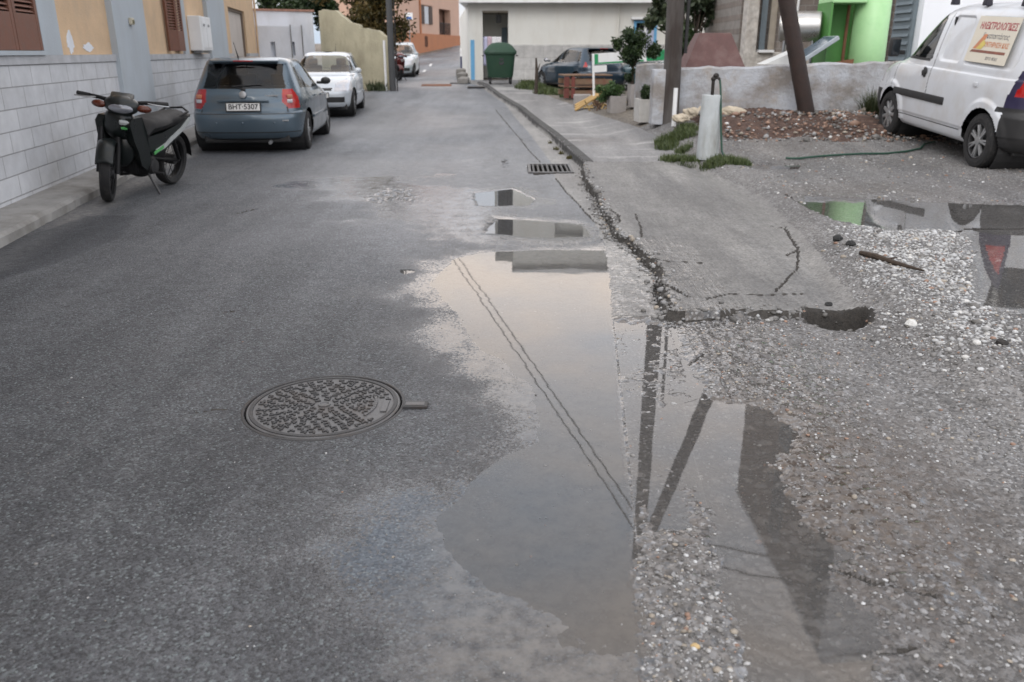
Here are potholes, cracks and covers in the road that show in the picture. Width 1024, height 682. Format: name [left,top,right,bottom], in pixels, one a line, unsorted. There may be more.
drain grate [527,164,574,175]
pothole [801,306,876,332]
manhole cover [241,375,428,441]
crack [496,110,803,323]
